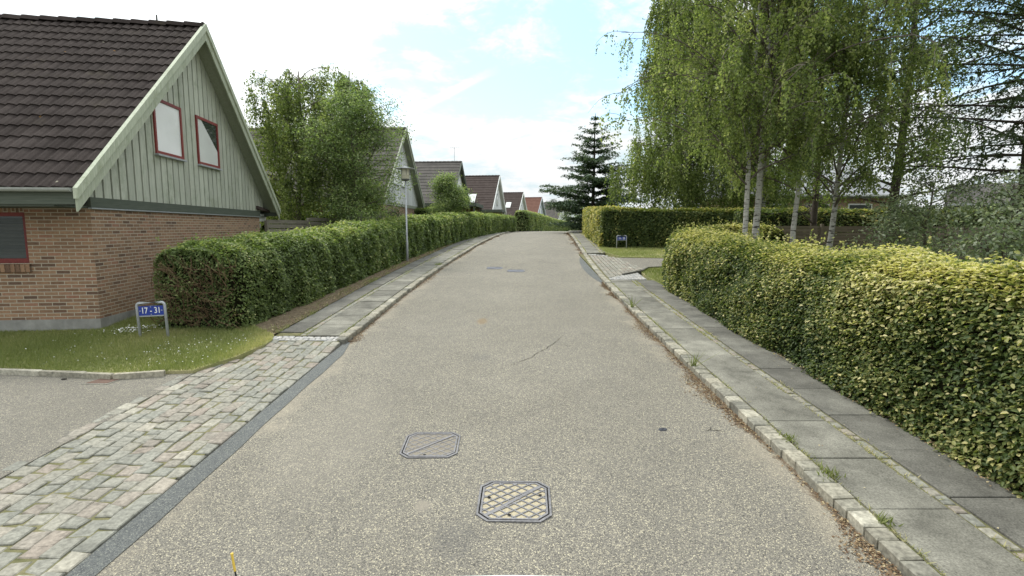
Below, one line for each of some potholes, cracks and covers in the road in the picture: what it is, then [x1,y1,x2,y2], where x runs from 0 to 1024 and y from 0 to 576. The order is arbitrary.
manhole cover [399,432,461,459]
manhole cover [476,481,552,523]
